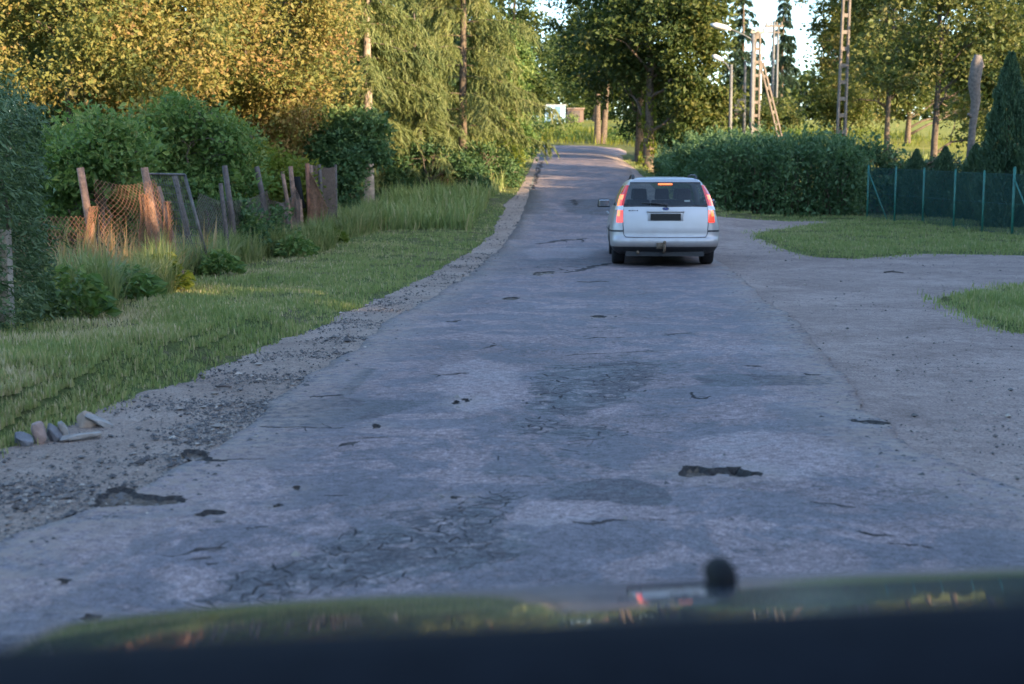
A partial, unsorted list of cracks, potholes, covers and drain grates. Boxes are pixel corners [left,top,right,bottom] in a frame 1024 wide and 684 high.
pothole [94,486,188,508]
pothole [180,449,228,462]
pothole [193,509,227,517]
pothole [678,465,763,477]
crack [163,489,527,607]
crack [498,332,686,461]
